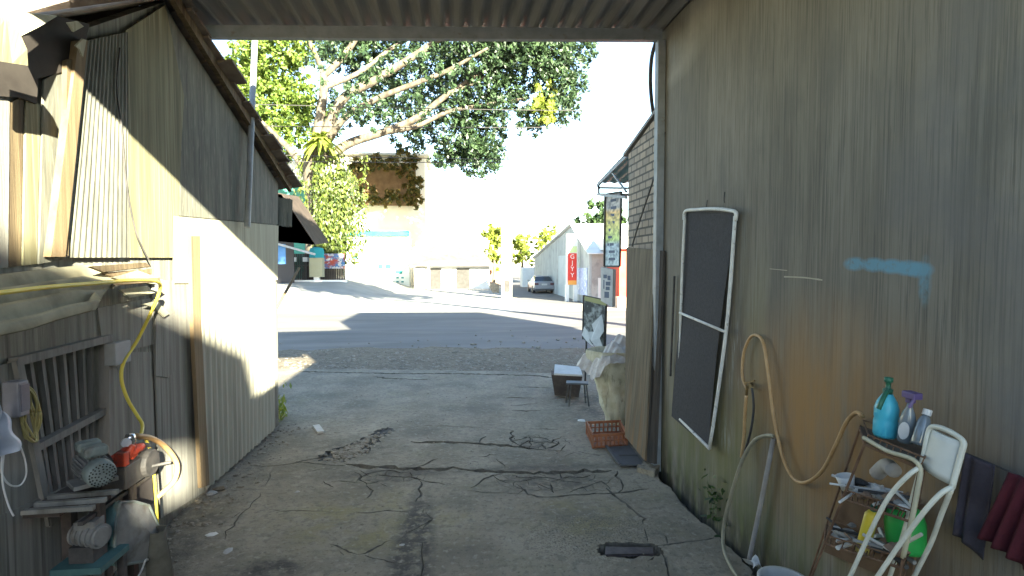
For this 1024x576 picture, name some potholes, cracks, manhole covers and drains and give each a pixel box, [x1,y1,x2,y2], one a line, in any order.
pothole [318,427,395,462]
crack [468,429,712,576]
crack [225,450,445,576]
